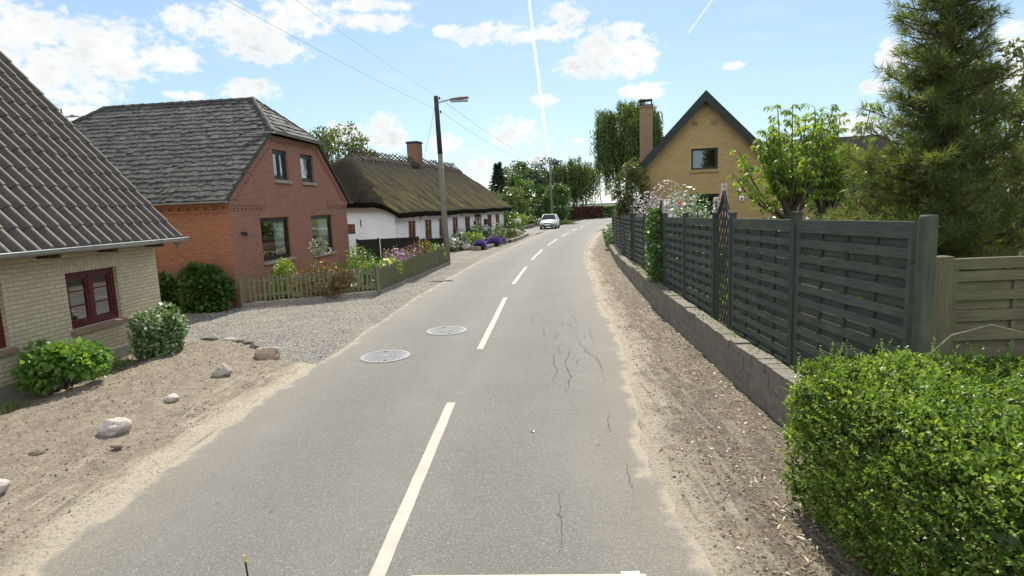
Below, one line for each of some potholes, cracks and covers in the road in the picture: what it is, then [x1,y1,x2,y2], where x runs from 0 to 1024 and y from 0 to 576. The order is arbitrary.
manhole cover [360,350,411,363]
crack [531,291,605,395]
manhole cover [426,326,467,335]
